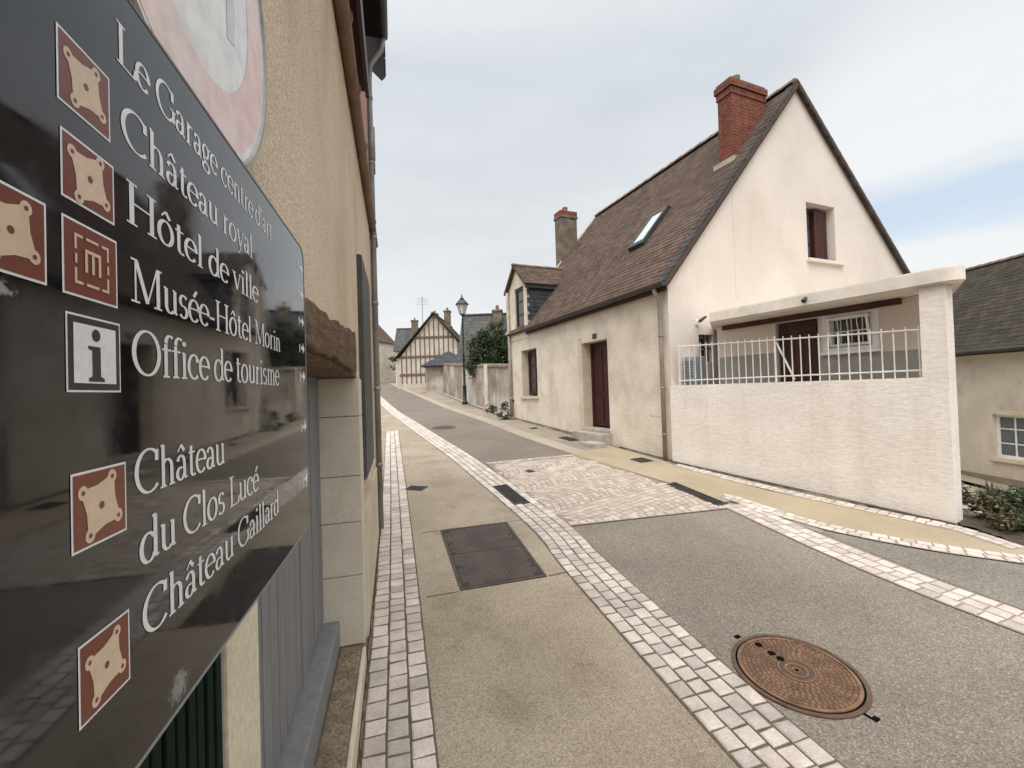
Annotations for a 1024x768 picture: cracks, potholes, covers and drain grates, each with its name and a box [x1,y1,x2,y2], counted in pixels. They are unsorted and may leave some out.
drain grate [667,482,728,506]
manhole cover [731,634,881,722]
utility cover [440,522,547,591]
drain grate [494,484,529,505]
